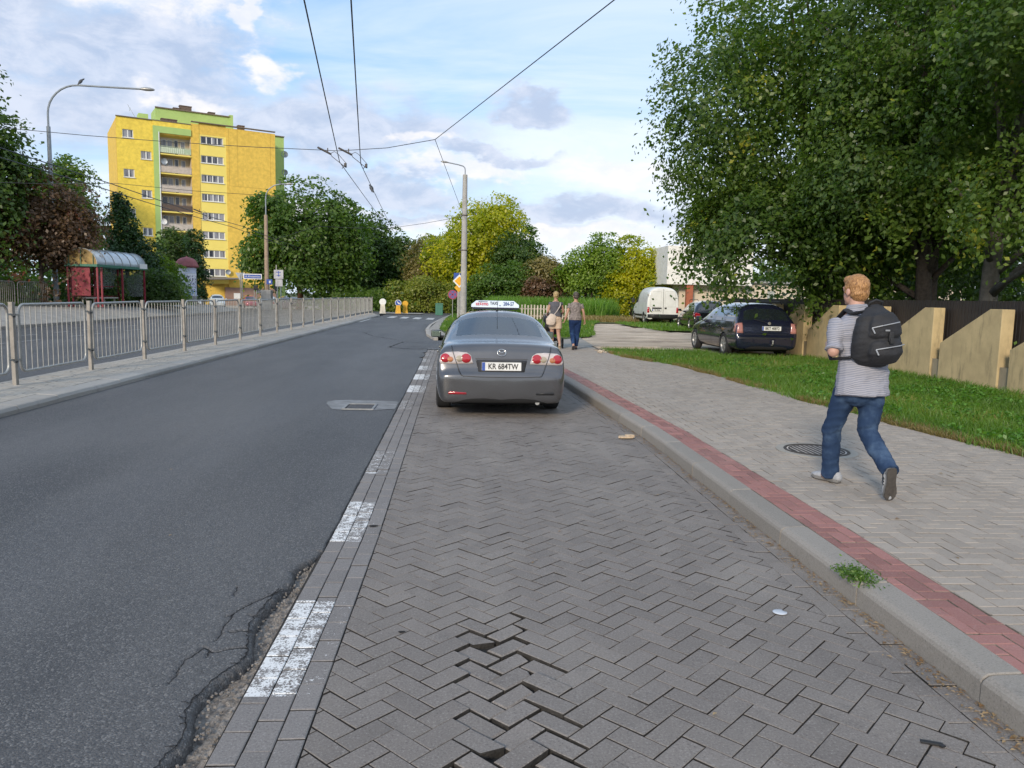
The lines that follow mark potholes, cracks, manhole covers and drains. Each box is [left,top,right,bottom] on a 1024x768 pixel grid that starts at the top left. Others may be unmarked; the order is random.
manhole cover [775,443,859,459]
crack [153,587,283,768]
